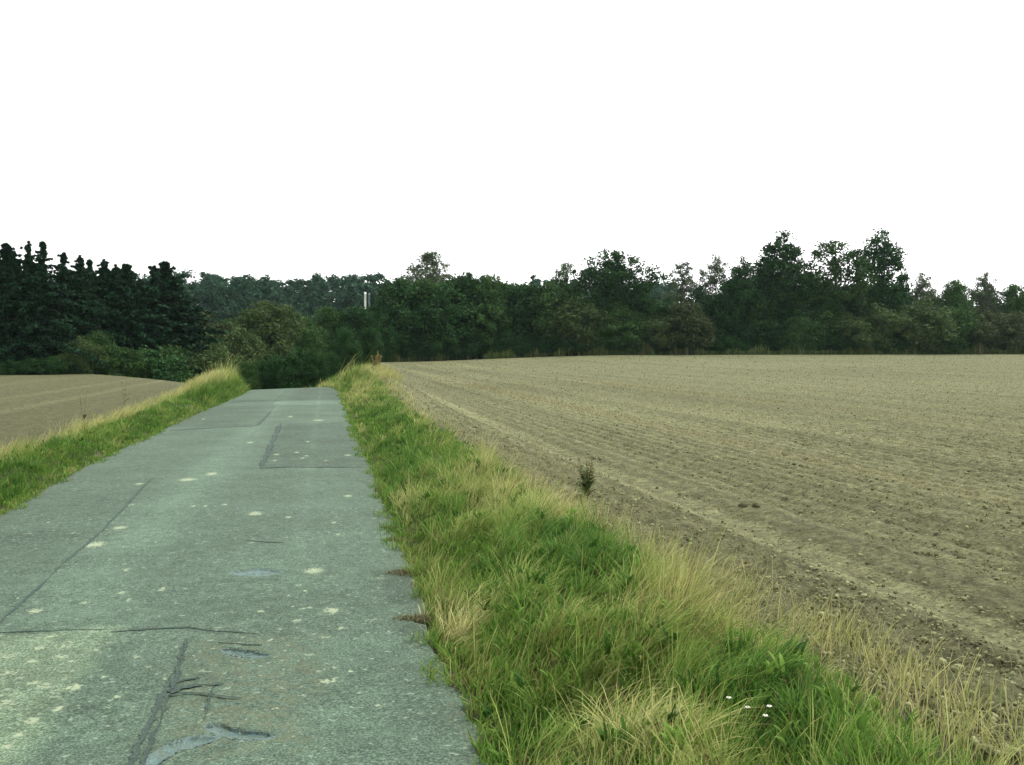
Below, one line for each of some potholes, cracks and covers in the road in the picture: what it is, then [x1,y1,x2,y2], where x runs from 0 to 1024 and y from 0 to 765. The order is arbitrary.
pothole [230,568,285,577]
pothole [145,735,220,765]
pothole [202,723,276,741]
pothole [220,648,272,658]
crack [0,481,261,765]
